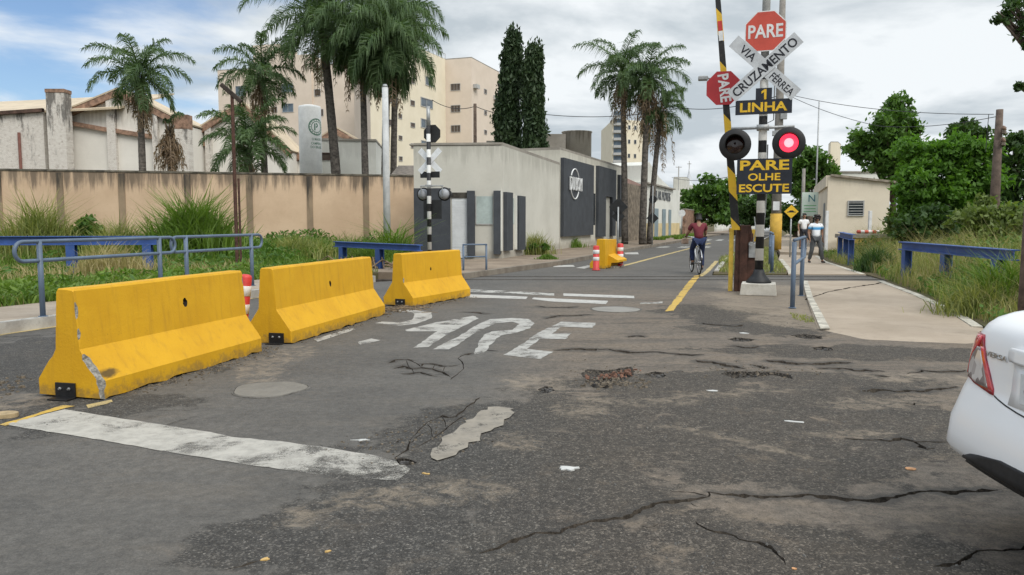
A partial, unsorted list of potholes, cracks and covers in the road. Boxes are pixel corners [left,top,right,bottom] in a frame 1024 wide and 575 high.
crack [387,353,471,380]
pothole [721,371,792,379]
pothole [581,367,641,389]
manhole cover [231,381,311,399]
crack [805,282,880,300]
crack [554,336,965,405]
crack [479,489,1024,567]
crack [395,397,481,465]
